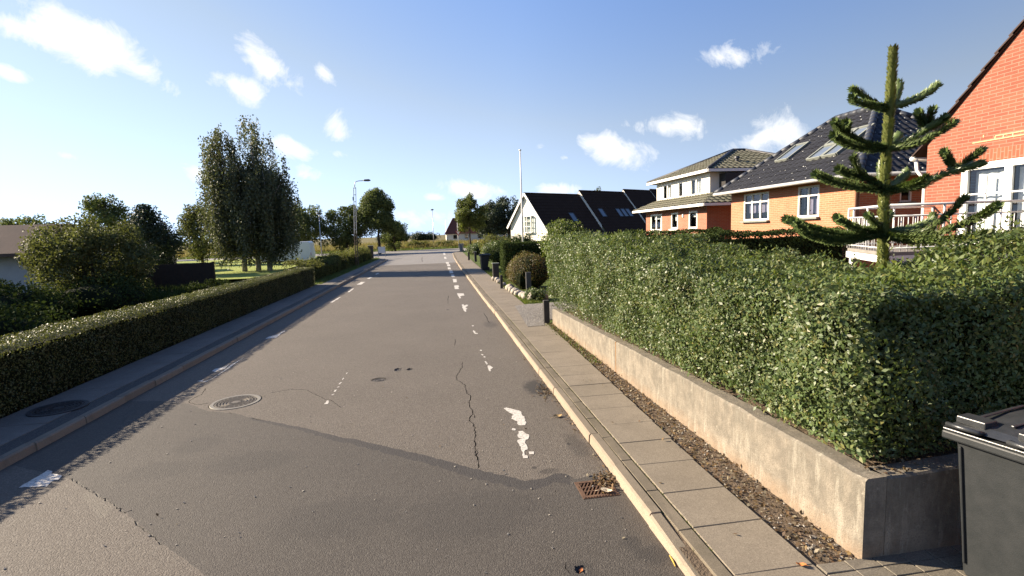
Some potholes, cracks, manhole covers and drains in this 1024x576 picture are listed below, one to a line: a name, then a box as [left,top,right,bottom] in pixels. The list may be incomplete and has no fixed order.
drain grate [574,479,620,499]
crack [456,362,480,468]
manhole cover [25,400,90,417]
manhole cover [209,394,262,410]
